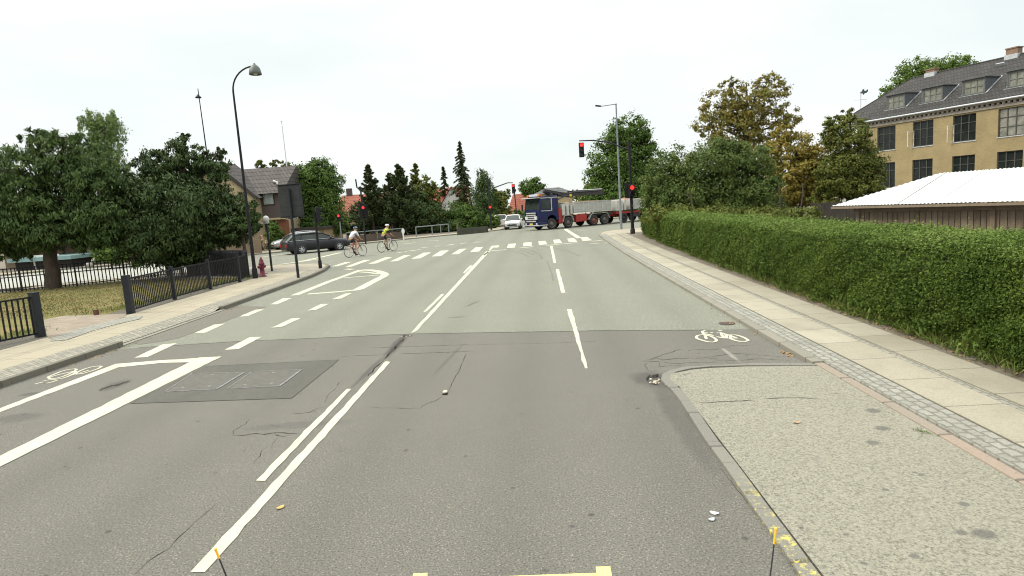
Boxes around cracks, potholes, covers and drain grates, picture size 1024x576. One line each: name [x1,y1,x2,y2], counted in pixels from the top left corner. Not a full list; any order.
manhole cover [164,372,245,392]
crack [232,420,295,461]
crack [343,338,594,409]
crack [645,345,789,375]
manhole cover [226,369,303,389]
crack [139,504,216,570]
